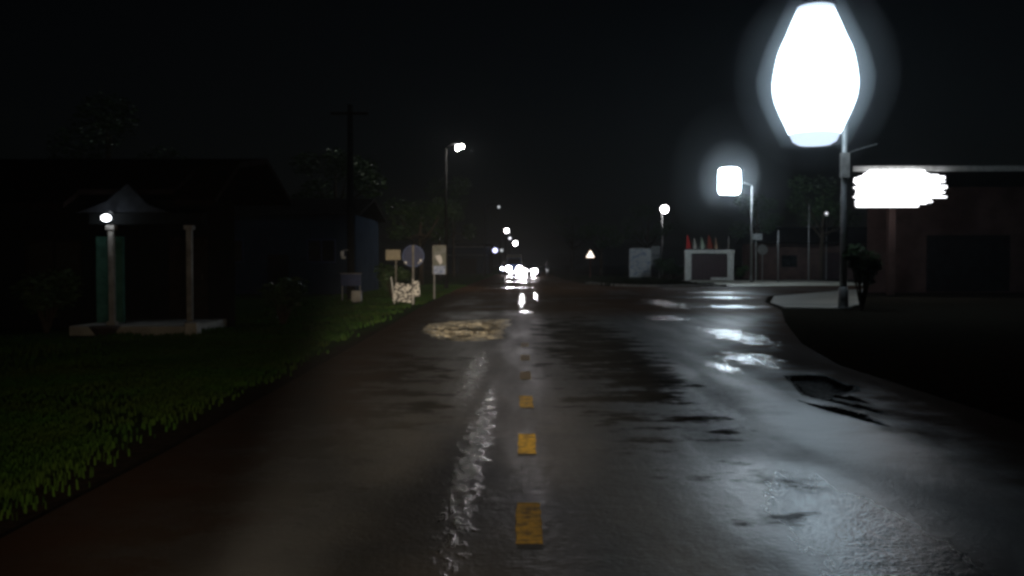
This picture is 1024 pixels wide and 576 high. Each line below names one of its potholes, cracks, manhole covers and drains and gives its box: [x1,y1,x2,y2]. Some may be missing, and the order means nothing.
pothole [782,374,861,399]
